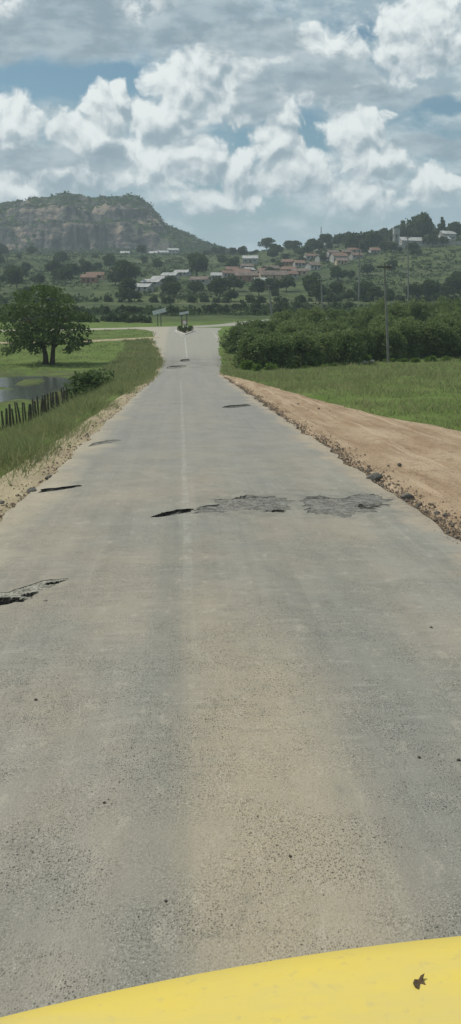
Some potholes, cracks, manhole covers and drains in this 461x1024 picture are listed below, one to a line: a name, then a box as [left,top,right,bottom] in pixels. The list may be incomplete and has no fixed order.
pothole [38,485,82,493]
pothole [151,509,194,517]
pothole [0,578,68,605]
pothole [300,494,394,518]
pothole [193,495,295,514]
